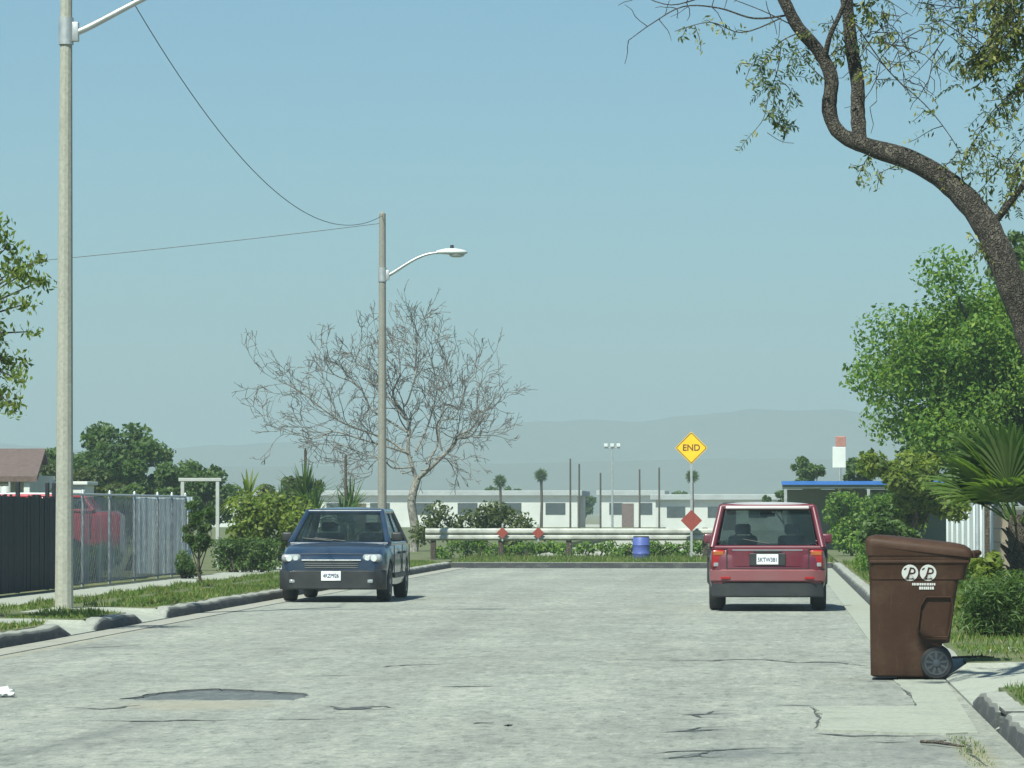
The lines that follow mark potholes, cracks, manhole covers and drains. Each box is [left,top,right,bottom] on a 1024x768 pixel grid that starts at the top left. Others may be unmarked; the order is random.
crack [67,705,205,721]
crack [652,705,929,759]
crack [266,706,394,720]
